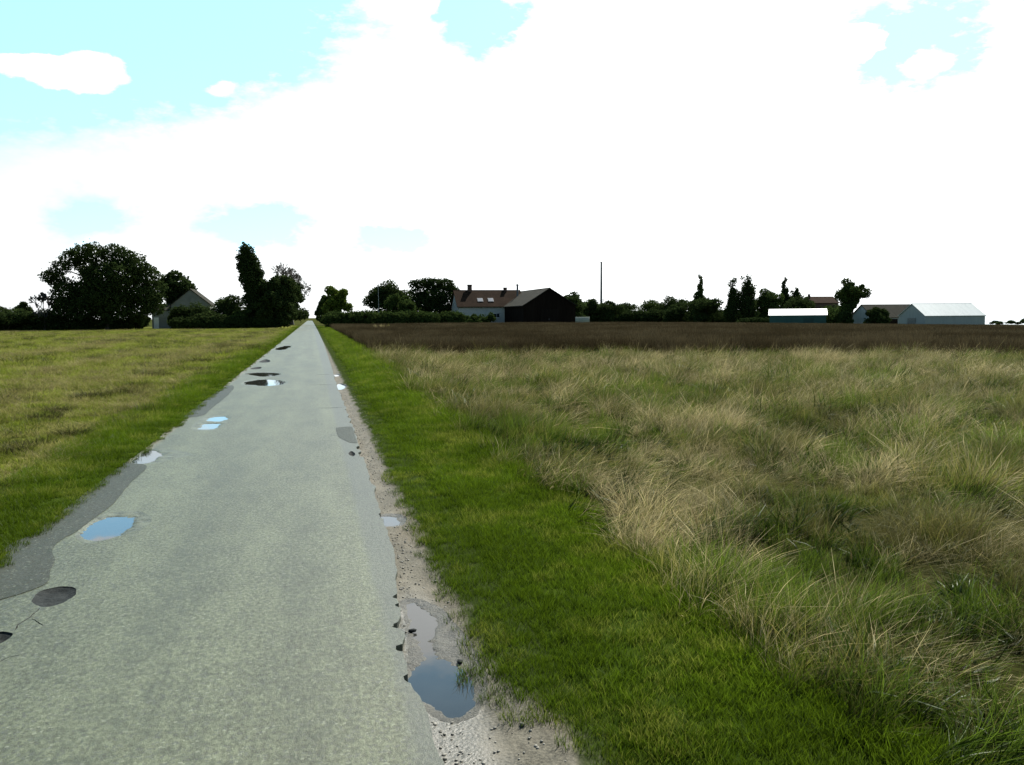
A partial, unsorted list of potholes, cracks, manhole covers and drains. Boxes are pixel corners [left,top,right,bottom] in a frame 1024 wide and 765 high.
pothole [400,598,488,724]
pothole [241,378,288,387]
pothole [31,586,76,607]
pothole [75,511,152,543]
pothole [380,513,407,527]
pothole [191,415,231,431]
